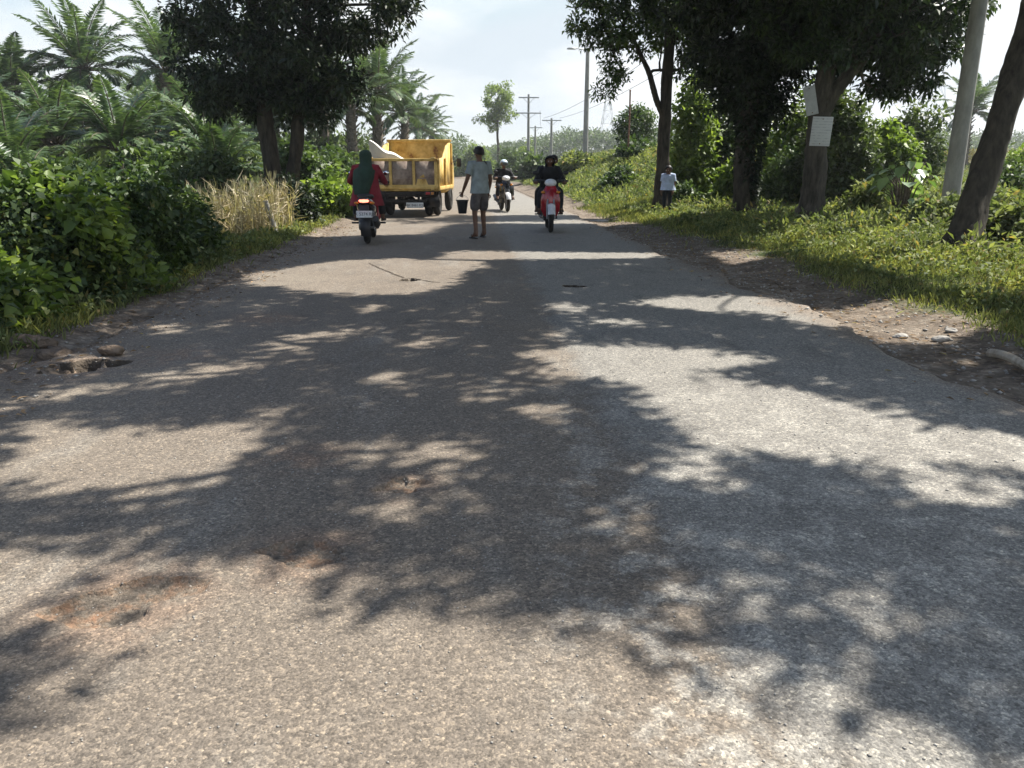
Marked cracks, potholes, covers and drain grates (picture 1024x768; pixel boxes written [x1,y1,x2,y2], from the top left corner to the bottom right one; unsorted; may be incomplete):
pothole [5,564,236,644]
pothole [22,356,145,378]
pothole [354,469,450,502]
pothole [232,530,370,580]
